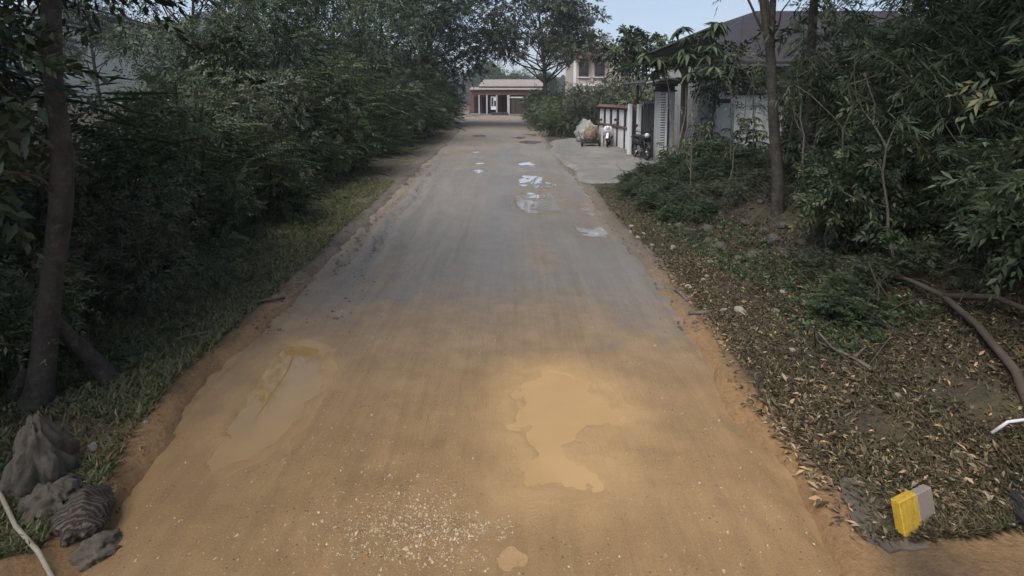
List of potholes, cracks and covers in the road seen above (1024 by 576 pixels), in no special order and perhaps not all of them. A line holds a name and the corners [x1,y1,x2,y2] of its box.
pothole [572,219,611,239]
pothole [491,365,639,501]
pothole [188,338,337,483]
pothole [516,173,564,189]
pothole [513,191,567,214]
